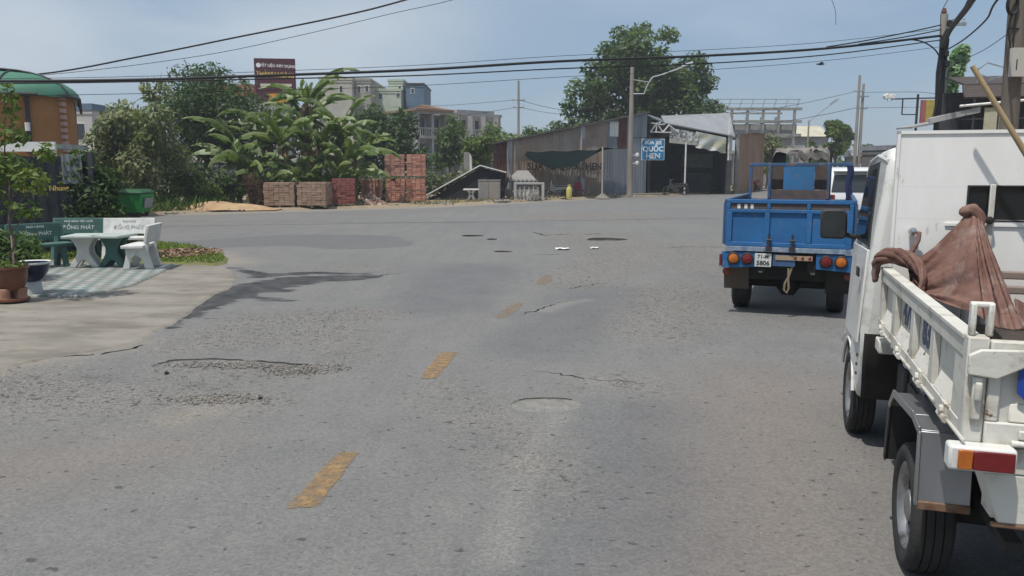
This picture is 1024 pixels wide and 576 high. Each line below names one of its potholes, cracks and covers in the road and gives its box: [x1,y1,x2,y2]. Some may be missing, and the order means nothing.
crack [539,371,641,384]
crack [64,345,142,357]
pothole [152,358,322,392]
